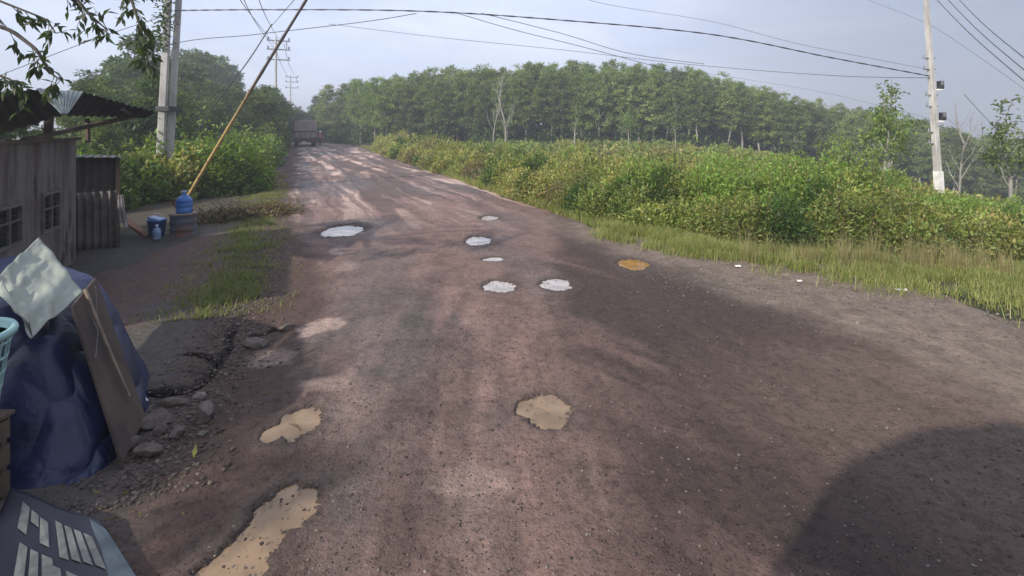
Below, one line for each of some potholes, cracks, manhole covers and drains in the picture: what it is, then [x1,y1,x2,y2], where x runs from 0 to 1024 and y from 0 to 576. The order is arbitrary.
pothole [472,213,508,223]
pothole [497,380,593,447]
crack [146,325,277,398]
pothole [292,218,392,245]
pothole [472,255,515,264]
pothole [245,392,343,459]
pothole [161,464,350,576]
pothole [462,274,531,298]
pothole [528,273,587,297]
pothole [454,232,501,250]
